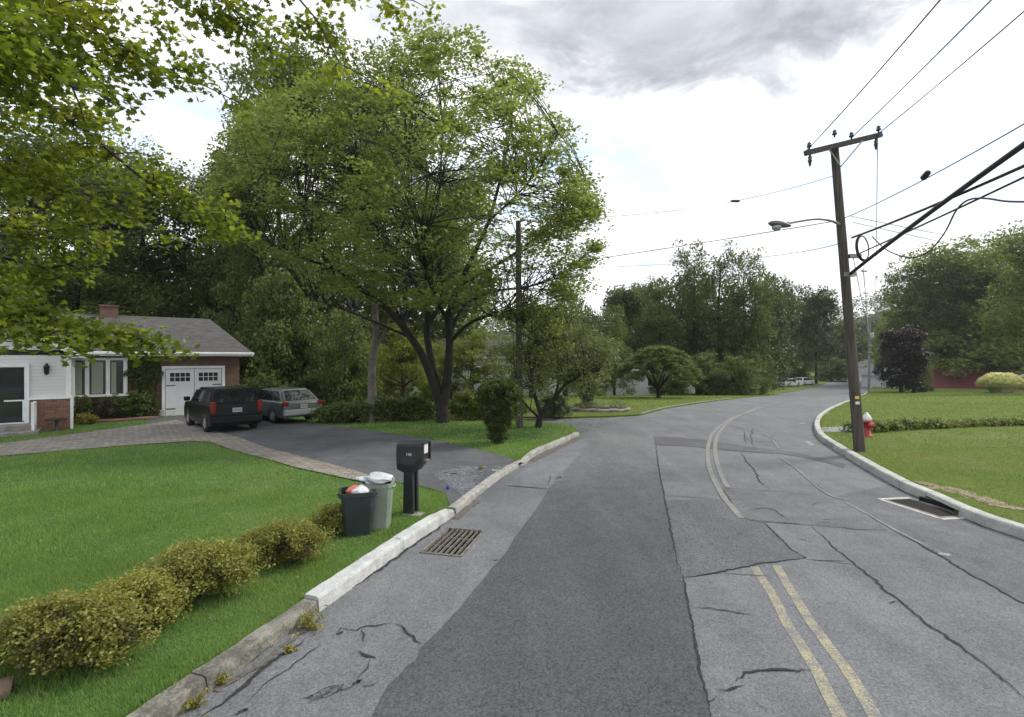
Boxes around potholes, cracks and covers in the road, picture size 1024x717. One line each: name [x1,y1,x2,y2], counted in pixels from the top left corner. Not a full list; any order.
crack [654,425,1024,714]
crack [339,623,422,690]
drain grate [877,496,965,520]
drain grate [419,527,485,557]
